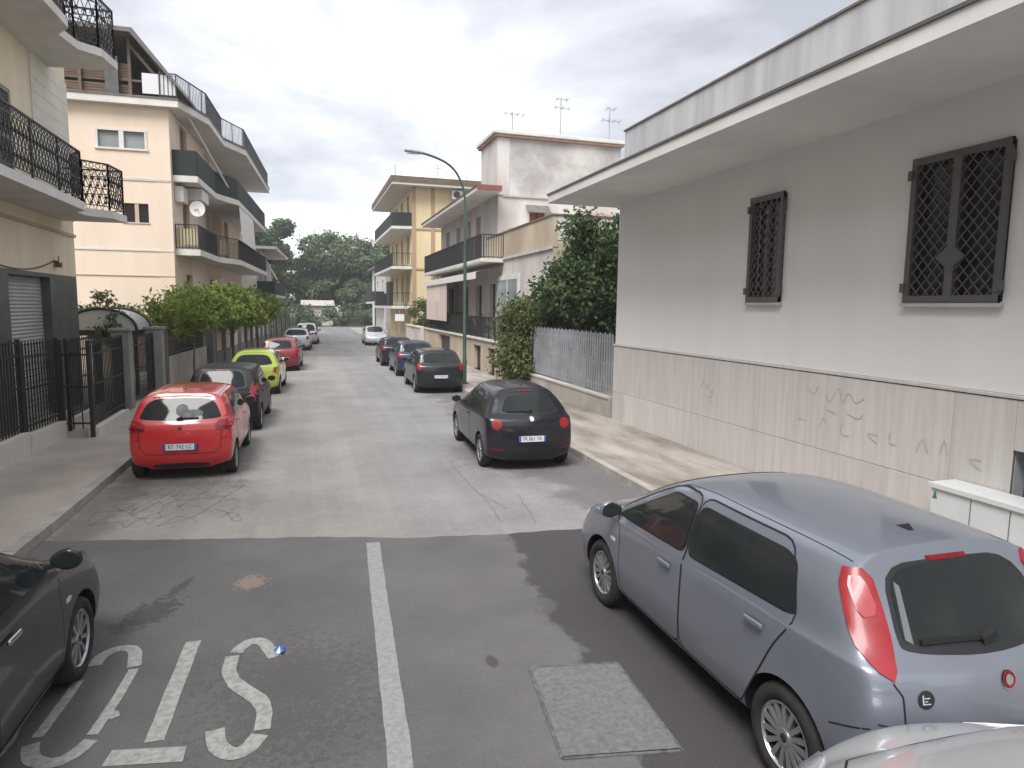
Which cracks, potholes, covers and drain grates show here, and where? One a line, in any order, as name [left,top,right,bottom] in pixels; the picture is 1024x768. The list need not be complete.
crack [88,469,261,530]
manhole cover [528,661,683,760]
crack [448,459,535,523]
